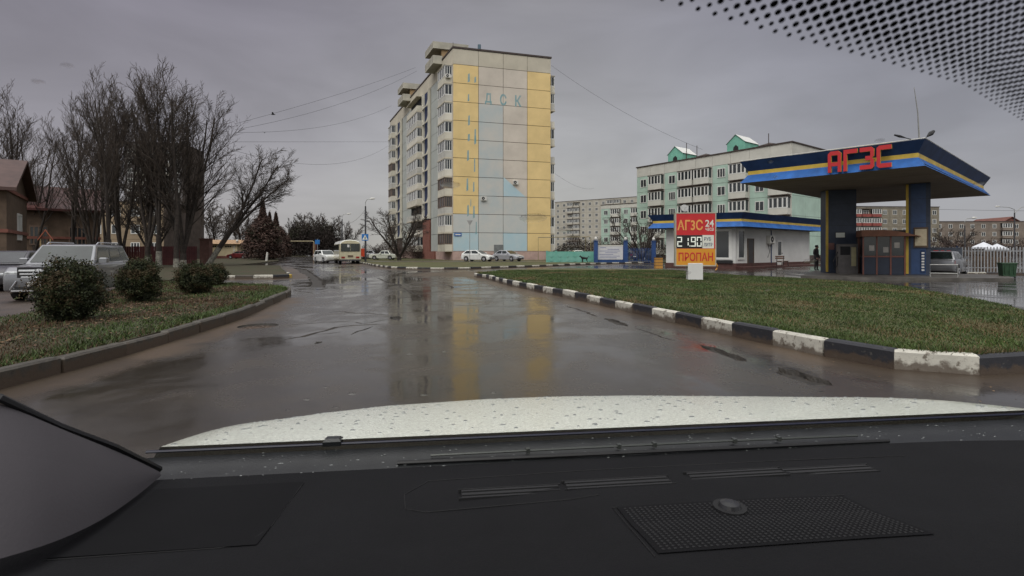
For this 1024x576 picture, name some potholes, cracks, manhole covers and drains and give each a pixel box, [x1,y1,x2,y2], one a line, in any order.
crack [569,307,675,341]
crack [284,278,421,340]
pothole [776,367,832,385]
pothole [700,345,747,361]
